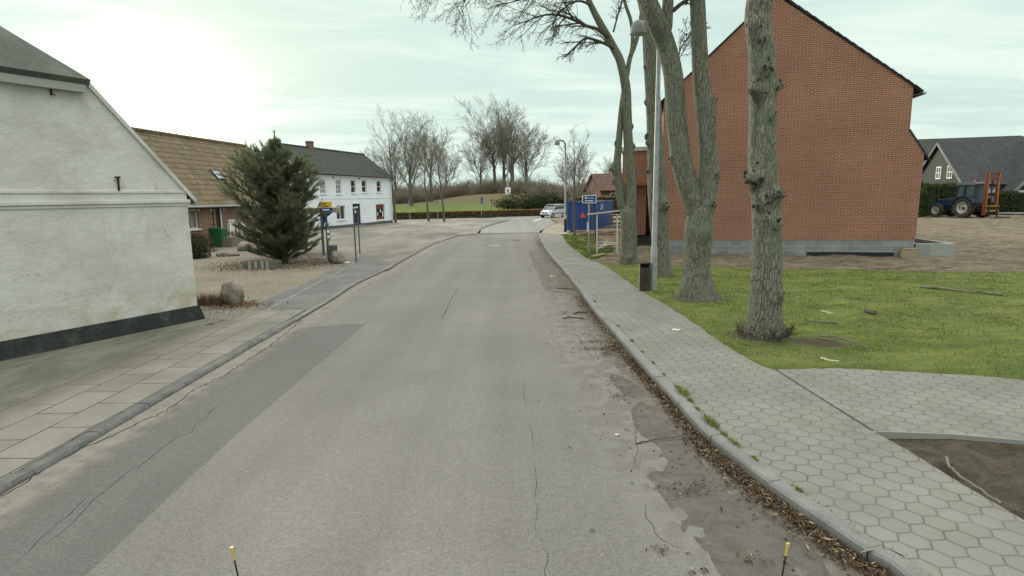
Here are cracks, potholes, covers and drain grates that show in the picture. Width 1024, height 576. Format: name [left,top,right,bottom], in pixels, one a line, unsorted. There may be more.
crack [2,403,222,571]
crack [523,383,548,576]
